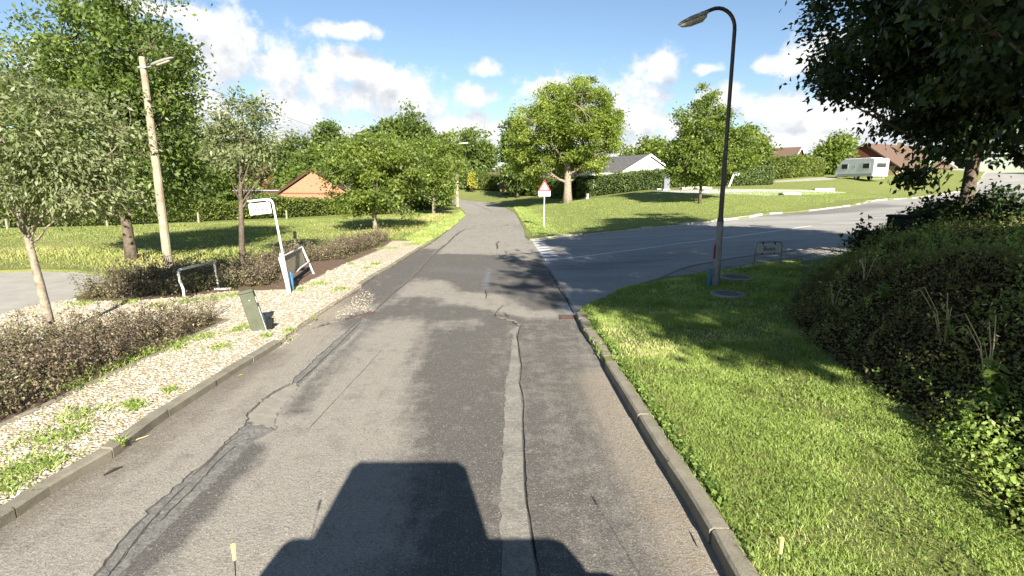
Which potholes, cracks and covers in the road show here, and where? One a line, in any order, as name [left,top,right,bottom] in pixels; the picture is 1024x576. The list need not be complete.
manhole cover [710,290,746,299]
crack [485,289,540,574]
manhole cover [720,274,755,282]
crack [291,317,377,429]
